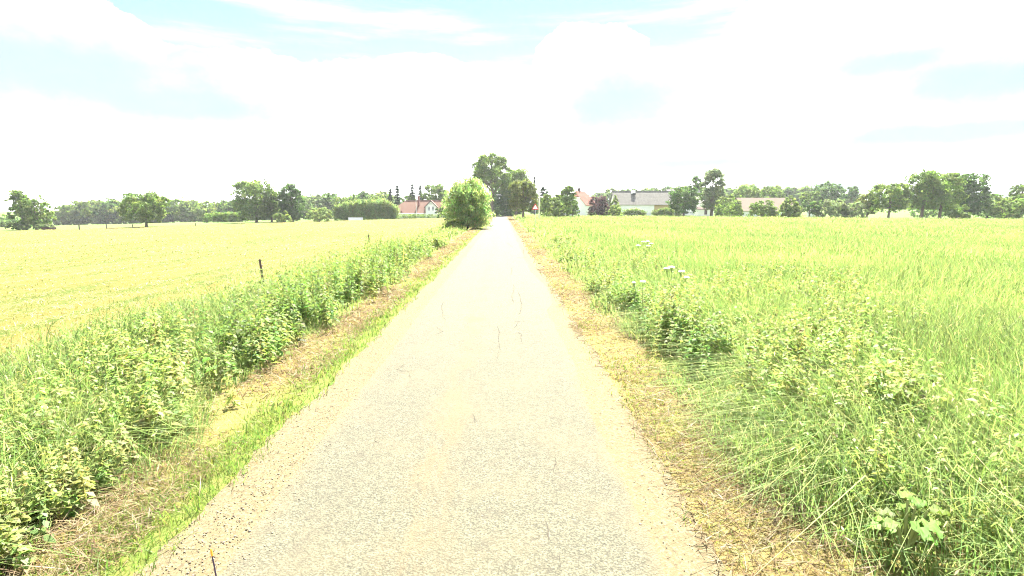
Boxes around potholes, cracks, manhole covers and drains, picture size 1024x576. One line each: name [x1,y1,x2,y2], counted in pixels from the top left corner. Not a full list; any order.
crack [497,271,523,359]
